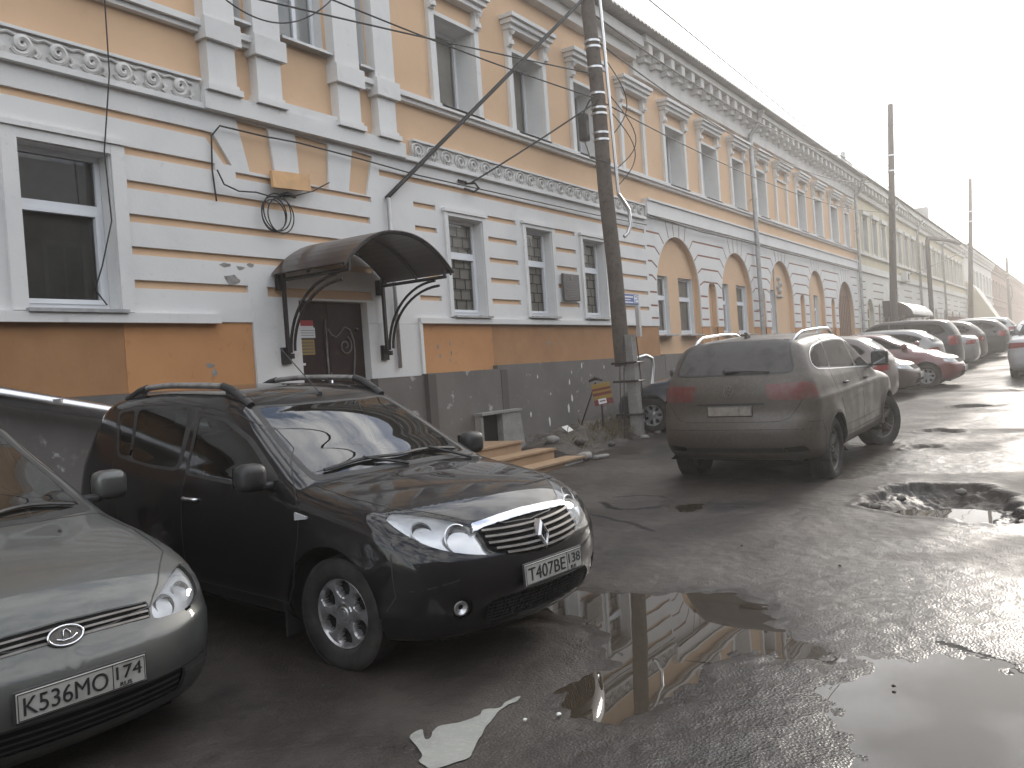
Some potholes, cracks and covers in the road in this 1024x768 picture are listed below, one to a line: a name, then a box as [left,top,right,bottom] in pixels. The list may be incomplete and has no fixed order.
pothole [853,482,1024,525]
crack [589,495,668,532]
